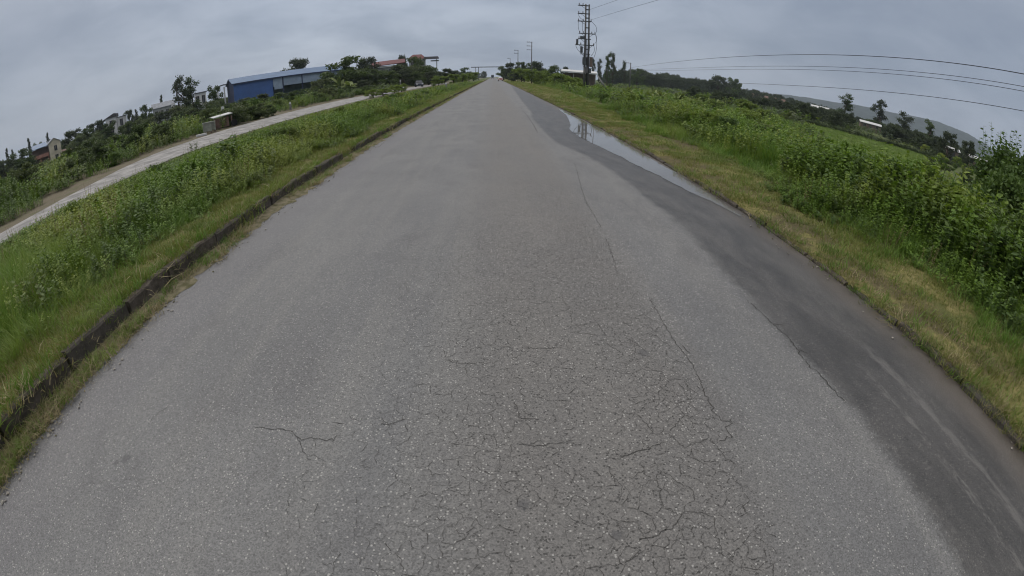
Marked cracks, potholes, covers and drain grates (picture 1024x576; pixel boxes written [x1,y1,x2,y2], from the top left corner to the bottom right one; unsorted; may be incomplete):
crack [266,209,629,576]
crack [747,300,845,401]
crack [516,172,782,576]
